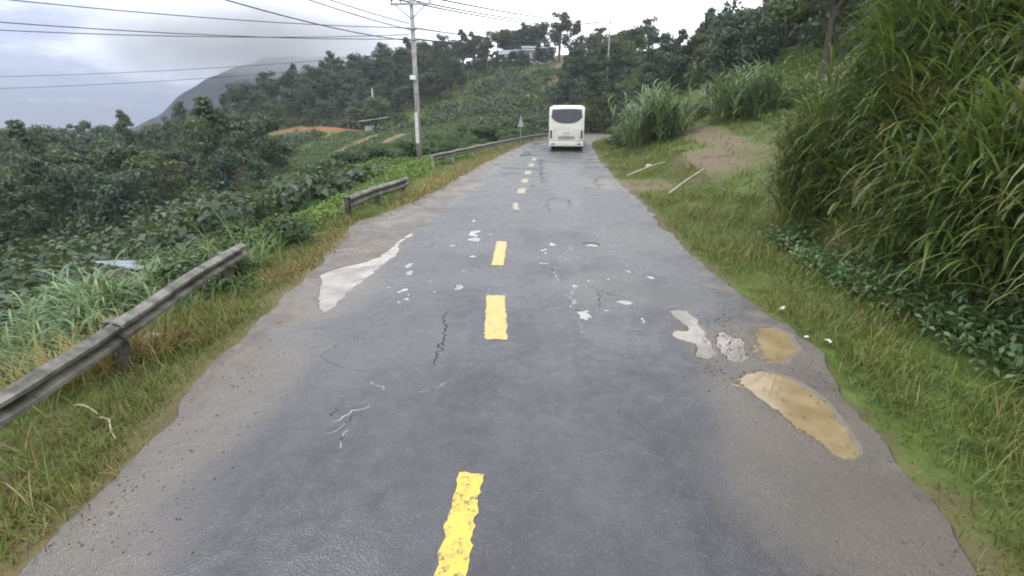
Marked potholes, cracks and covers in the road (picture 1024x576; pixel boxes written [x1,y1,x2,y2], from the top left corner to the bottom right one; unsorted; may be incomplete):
pothole [723,369,863,464]
pothole [715,330,750,362]
crack [537,160,587,213]
crack [418,312,456,392]
pothole [666,308,719,359]
crack [549,233,637,336]
pothole [747,325,802,365]
crack [321,341,390,448]
